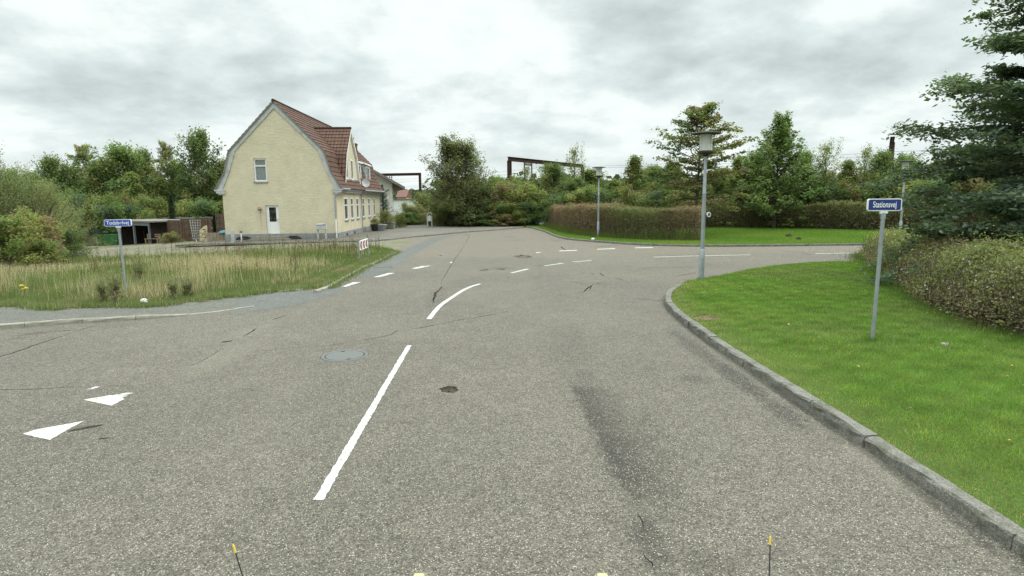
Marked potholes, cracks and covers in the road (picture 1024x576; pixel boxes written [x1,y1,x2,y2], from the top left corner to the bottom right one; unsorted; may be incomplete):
manhole cover [321,350,369,362]
